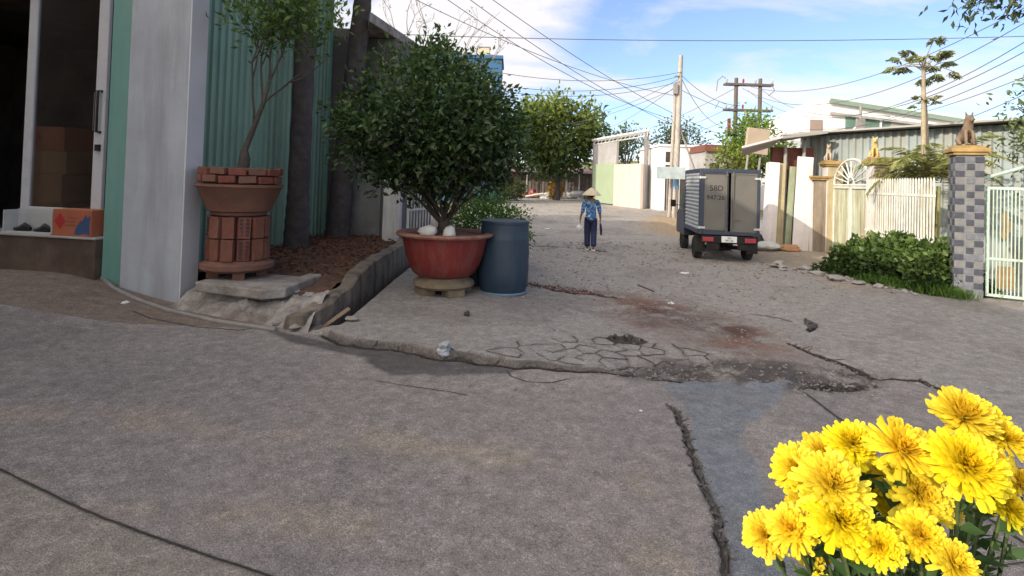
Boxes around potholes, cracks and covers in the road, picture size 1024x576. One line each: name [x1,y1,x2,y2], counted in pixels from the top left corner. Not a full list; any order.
crack [666,403,737,576]
pothole [800,382,878,392]
crack [786,343,942,390]
crack [322,335,713,395]
pothole [602,333,648,345]
